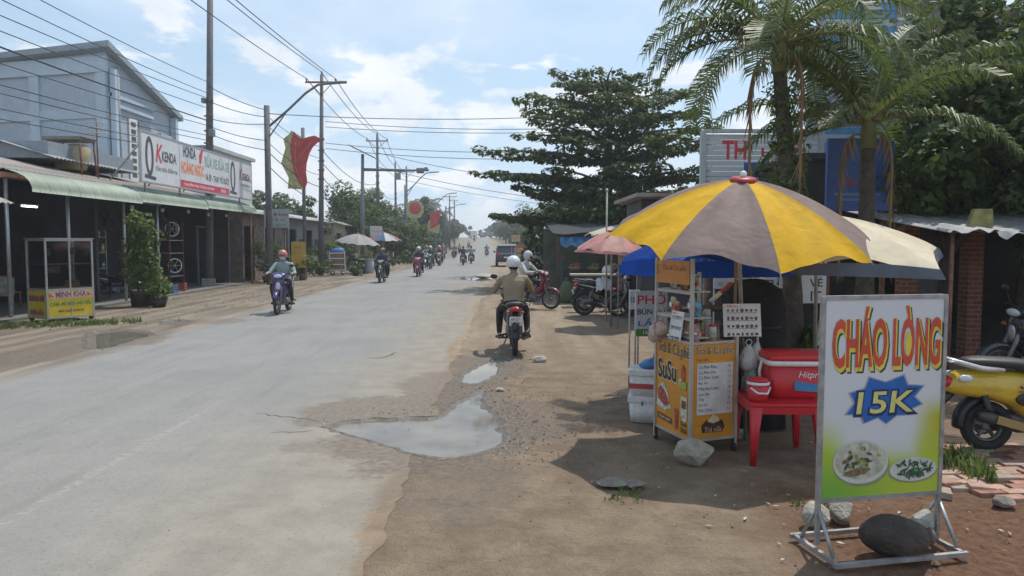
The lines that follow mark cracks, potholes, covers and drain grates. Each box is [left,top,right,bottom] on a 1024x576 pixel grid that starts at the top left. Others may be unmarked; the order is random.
pothole [81,329,159,350]
pothole [455,358,509,385]
pothole [320,390,512,460]
